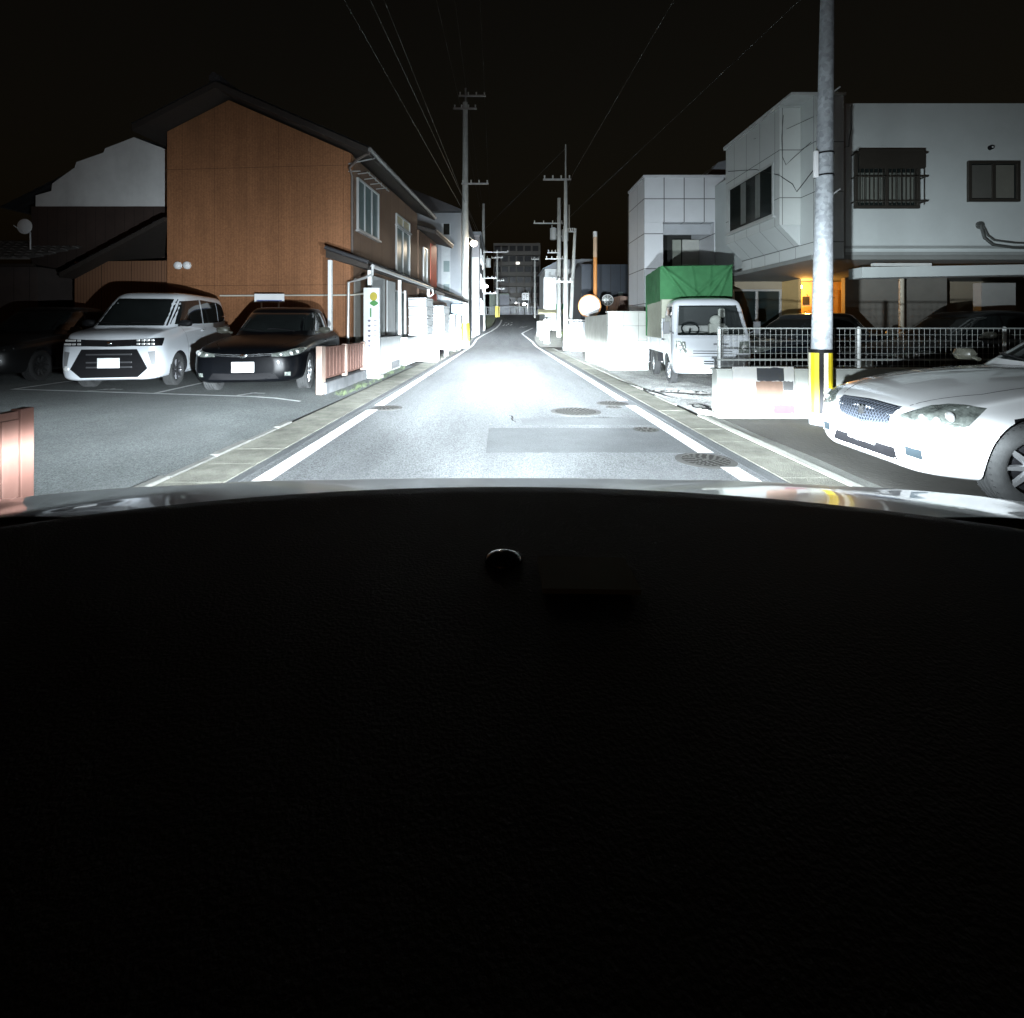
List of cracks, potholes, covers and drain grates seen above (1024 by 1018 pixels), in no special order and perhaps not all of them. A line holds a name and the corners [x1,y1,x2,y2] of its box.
manhole cover [675,453,738,469]
manhole cover [551,407,601,416]
